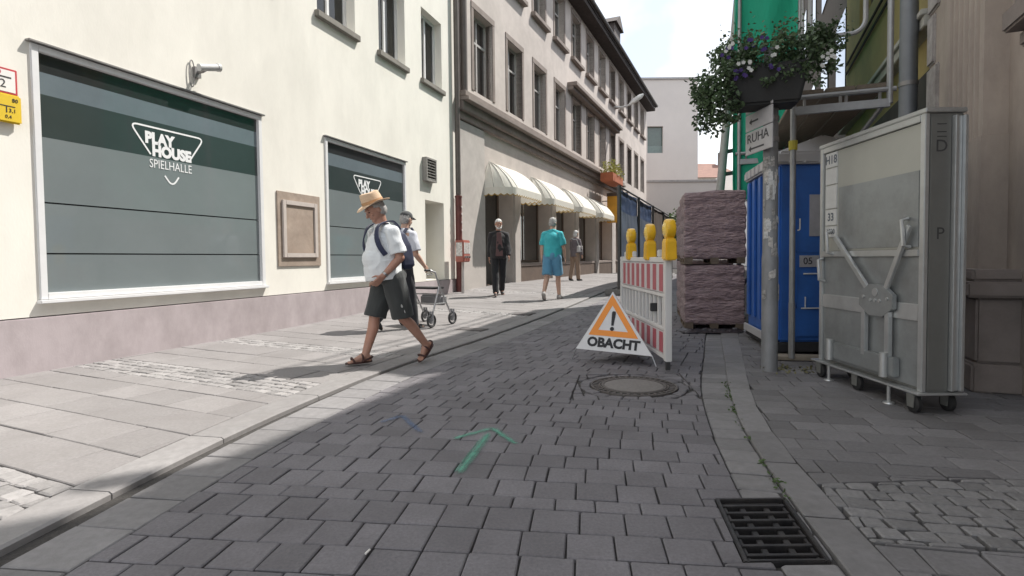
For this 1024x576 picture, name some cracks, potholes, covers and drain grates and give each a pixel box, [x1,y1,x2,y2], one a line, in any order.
manhole cover [591,376,678,399]
drain grate [715,497,831,568]
